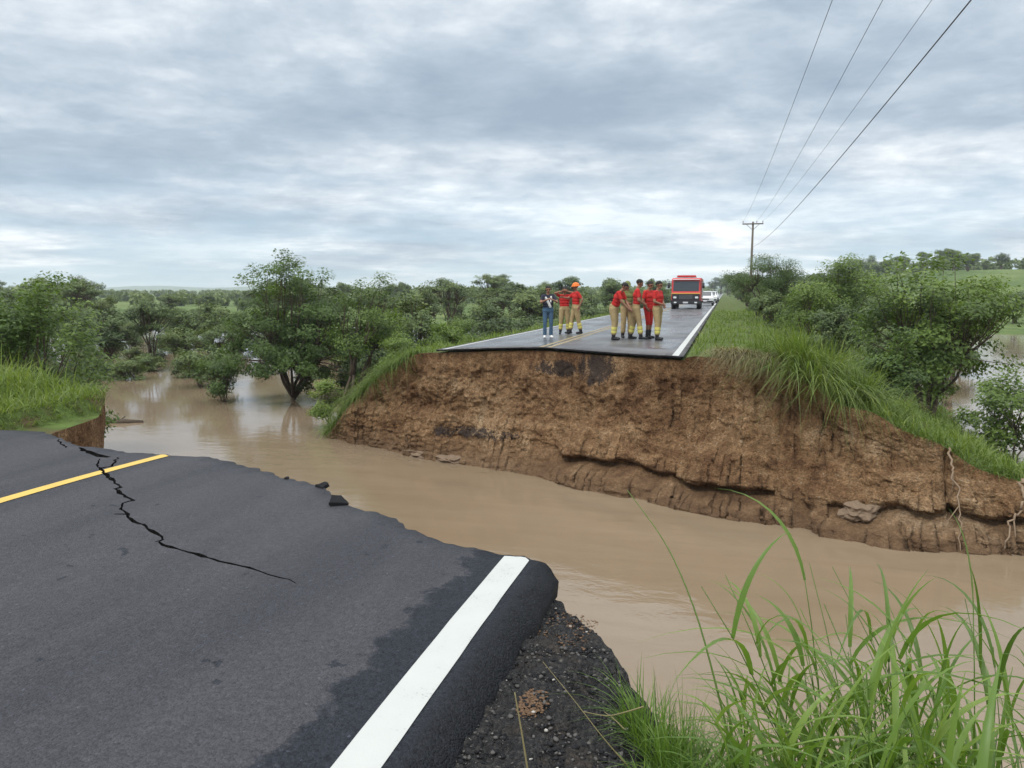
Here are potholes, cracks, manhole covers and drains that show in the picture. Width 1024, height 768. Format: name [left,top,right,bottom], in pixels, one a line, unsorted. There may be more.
crack [57,439,296,584]
